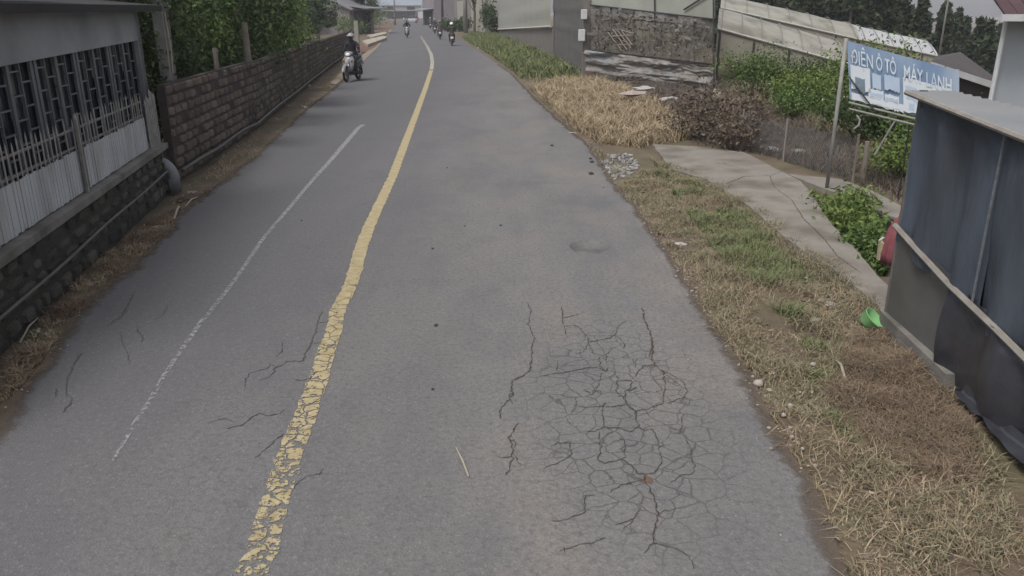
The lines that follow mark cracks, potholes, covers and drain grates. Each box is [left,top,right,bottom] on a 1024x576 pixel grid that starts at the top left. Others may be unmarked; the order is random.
crack [499,304,696,569]
crack [107,295,168,362]
crack [55,353,82,412]
crack [244,311,331,385]
crack [209,410,284,429]
